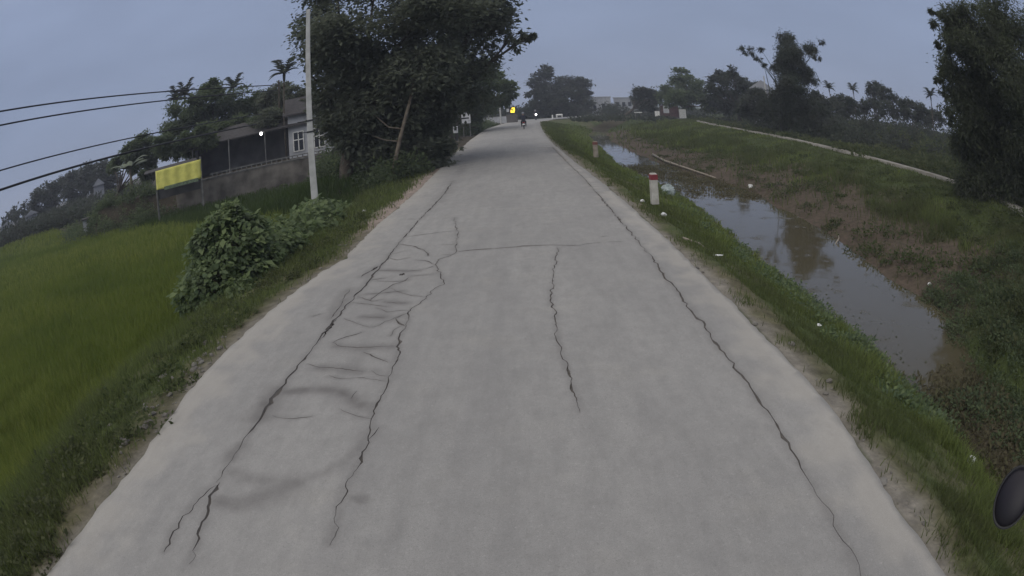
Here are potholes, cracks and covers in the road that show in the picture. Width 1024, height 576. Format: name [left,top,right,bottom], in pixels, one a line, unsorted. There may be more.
crack [459,243,589,411]
crack [554,149,861,576]
crack [164,184,459,560]
